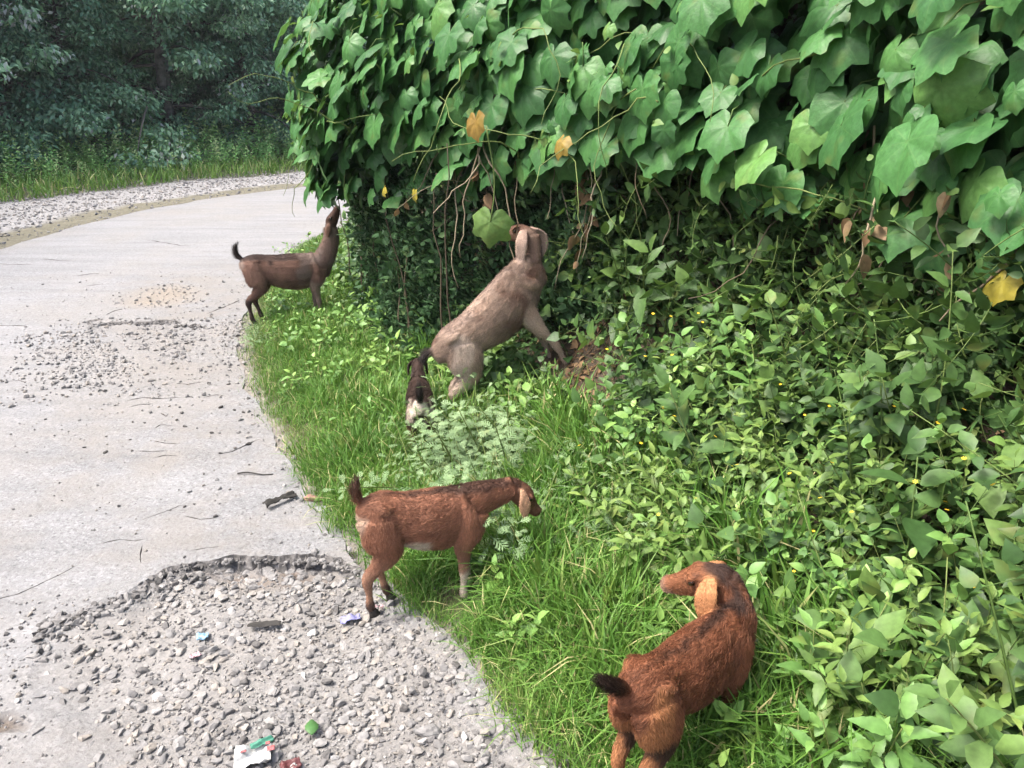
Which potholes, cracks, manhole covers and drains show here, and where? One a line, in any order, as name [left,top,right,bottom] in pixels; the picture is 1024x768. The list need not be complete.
pothole [79,319,221,375]
pothole [26,553,560,768]
